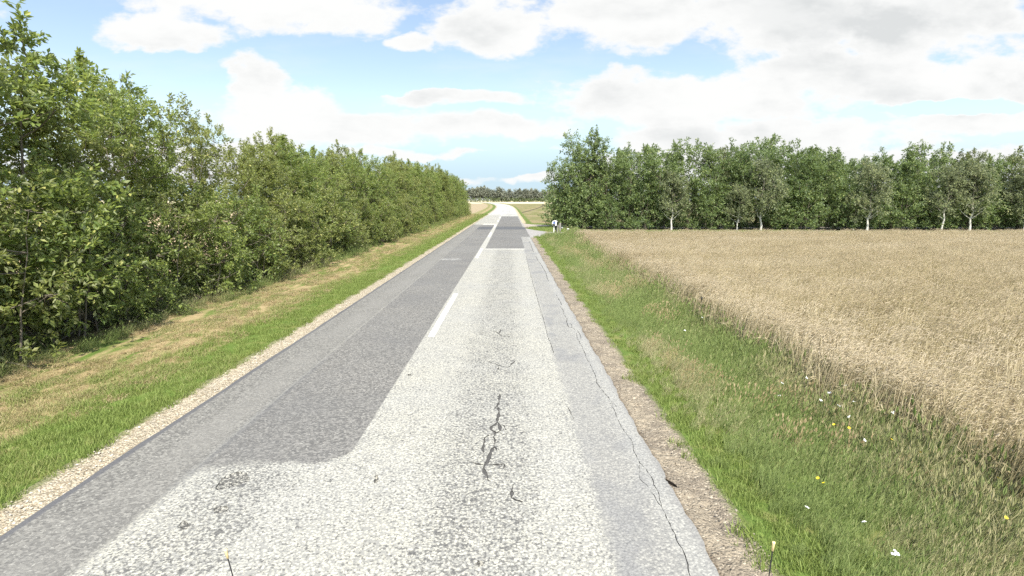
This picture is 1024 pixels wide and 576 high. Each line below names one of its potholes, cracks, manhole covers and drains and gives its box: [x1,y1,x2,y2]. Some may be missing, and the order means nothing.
crack [526,246,690,576]
crack [467,394,521,502]
